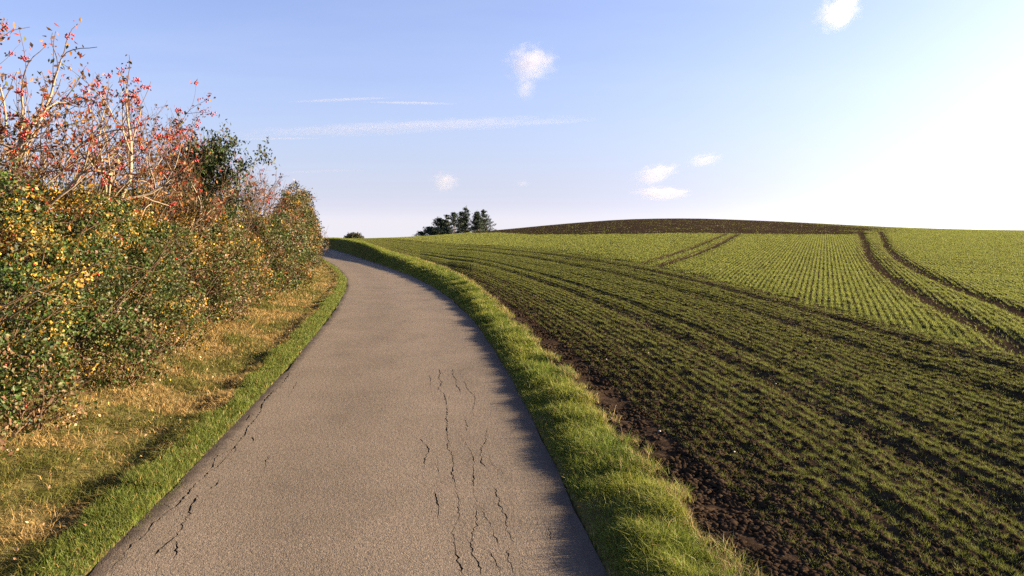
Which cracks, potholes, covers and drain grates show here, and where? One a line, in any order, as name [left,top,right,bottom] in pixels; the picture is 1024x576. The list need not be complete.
crack [419,370,516,576]
crack [107,347,304,575]
